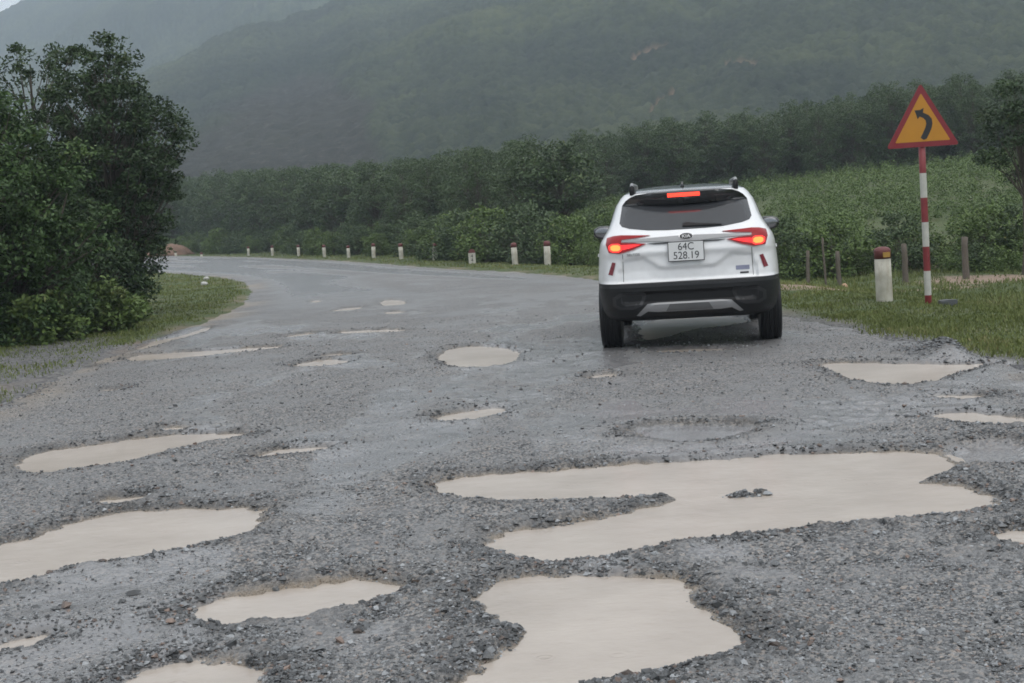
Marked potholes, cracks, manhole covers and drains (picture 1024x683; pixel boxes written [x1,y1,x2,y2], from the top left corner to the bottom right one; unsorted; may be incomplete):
pothole [420,446,1014,561]
pothole [287,356,354,366]
pothole [375,298,410,306]
pothole [173,570,417,624]
pothole [813,358,1001,384]
pothole [110,646,280,683]
pothole [7,428,257,473]
pothole [432,343,528,367]
pothole [923,407,1024,424]
pothole [124,343,286,361]
pothole [0,500,278,583]
pothole [427,403,511,421]
